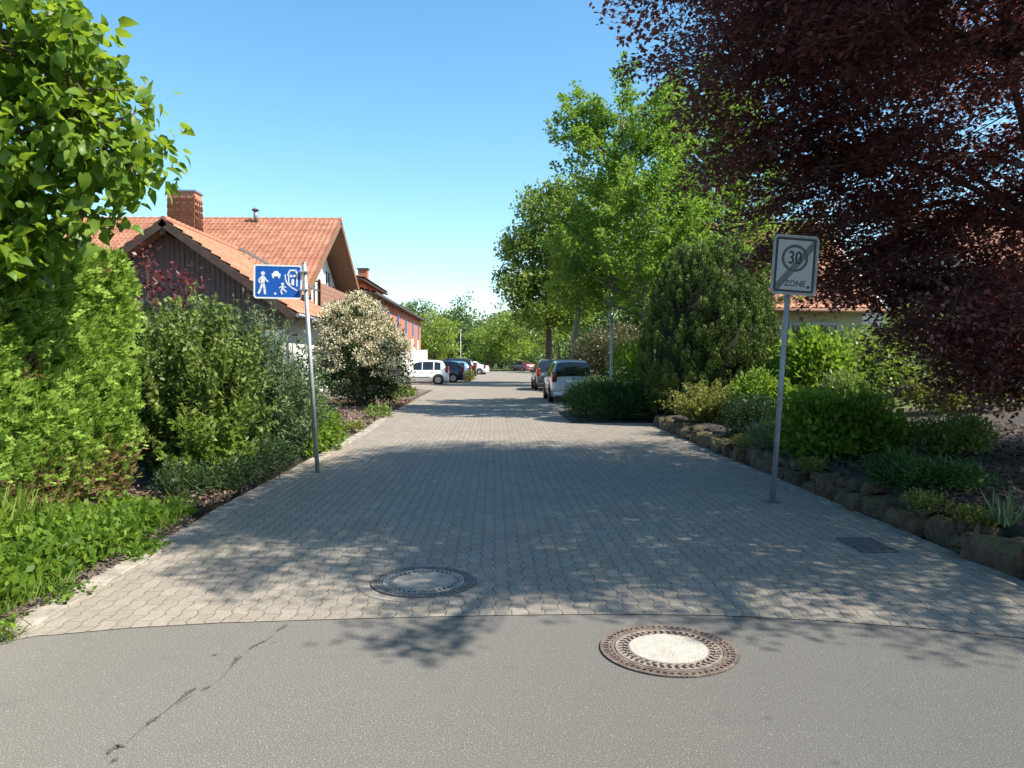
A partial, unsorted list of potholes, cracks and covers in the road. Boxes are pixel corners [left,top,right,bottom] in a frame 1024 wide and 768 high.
manhole cover [357,564,489,603]
crack [106,624,288,763]
manhole cover [600,625,740,678]
